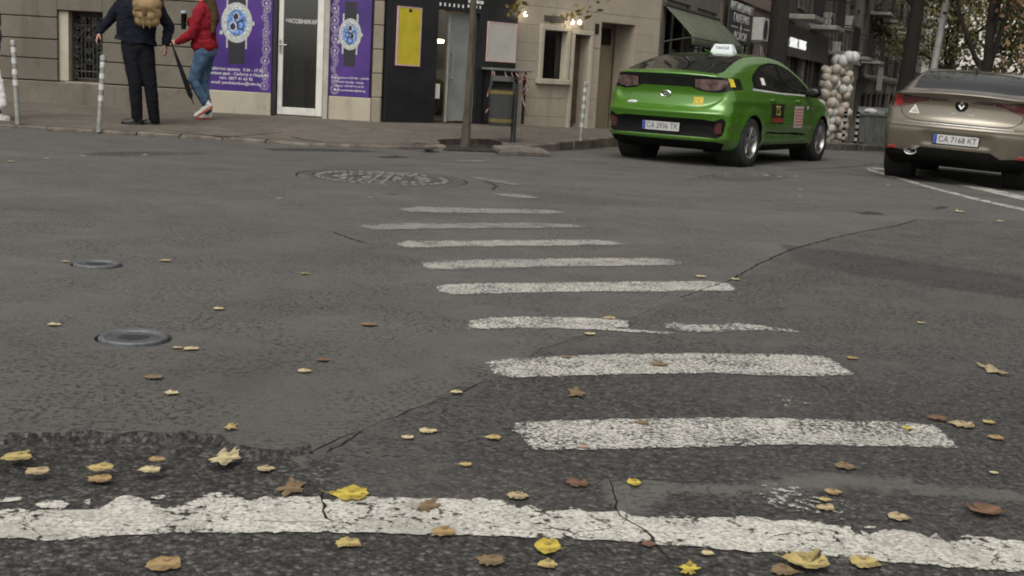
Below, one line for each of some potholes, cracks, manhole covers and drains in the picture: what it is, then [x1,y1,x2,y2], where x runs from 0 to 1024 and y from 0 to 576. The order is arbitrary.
crack [599,476,765,576]
manhole cover [94,329,172,348]
manhole cover [70,259,123,270]
manhole cover [295,169,468,188]
crack [309,220,915,454]
